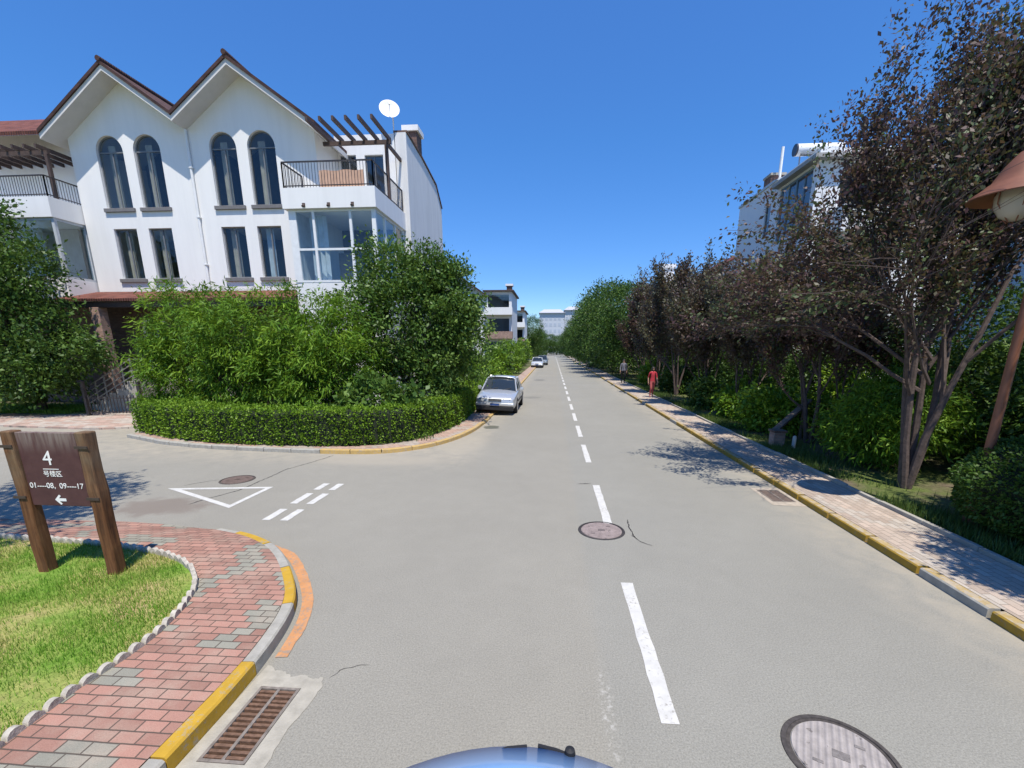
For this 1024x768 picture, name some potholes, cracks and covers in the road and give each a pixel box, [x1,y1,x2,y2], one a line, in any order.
manhole cover [578,521,625,540]
manhole cover [218,475,256,485]
drain grate [757,490,796,502]
drain grate [197,686,301,765]
manhole cover [780,714,902,768]
